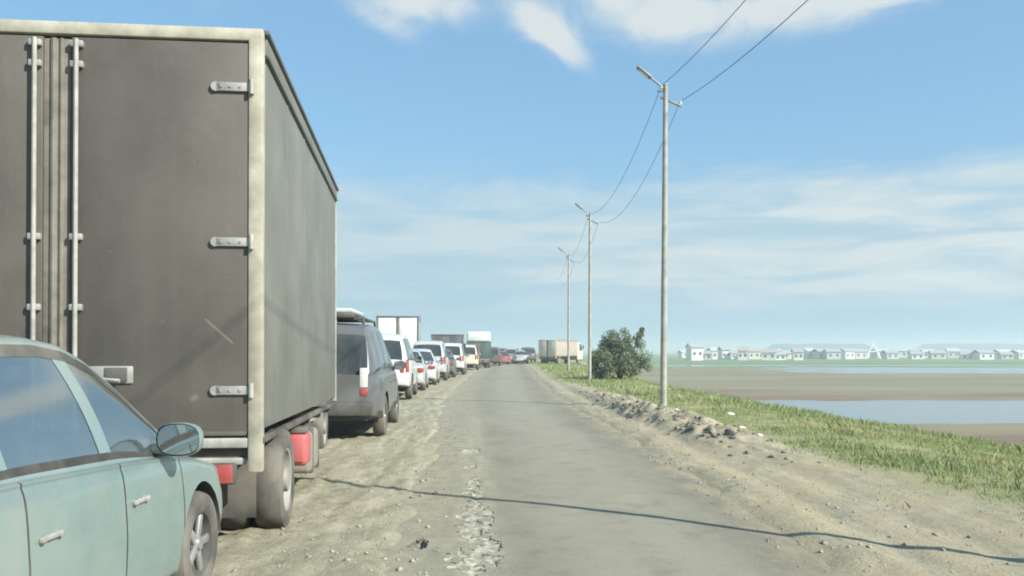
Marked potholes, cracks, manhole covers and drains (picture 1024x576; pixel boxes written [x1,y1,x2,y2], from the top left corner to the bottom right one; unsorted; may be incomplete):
pothole [407,539,429,551]
